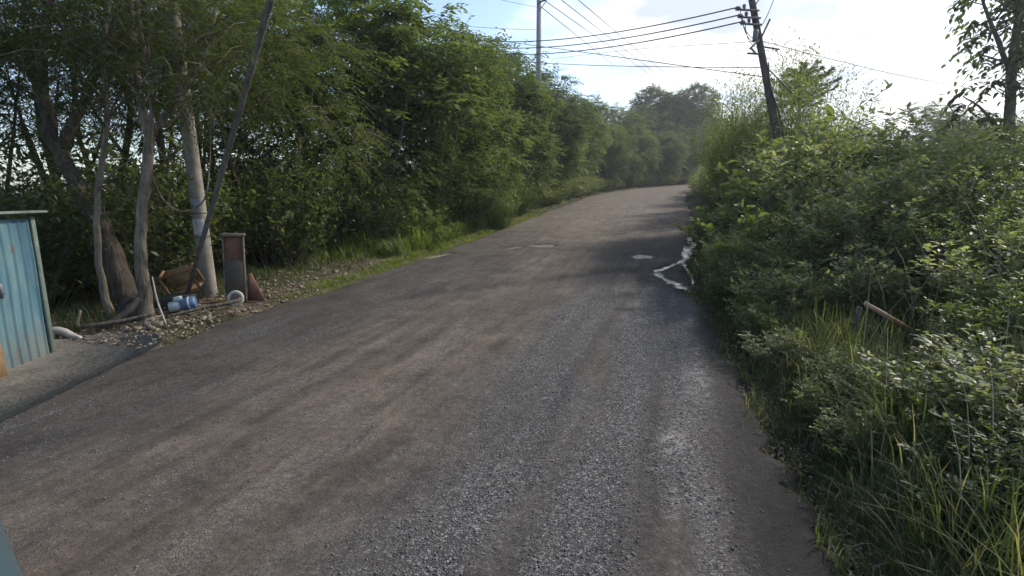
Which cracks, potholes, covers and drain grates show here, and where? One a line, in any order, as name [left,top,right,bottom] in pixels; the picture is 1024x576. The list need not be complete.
pothole [653,229,697,292]
